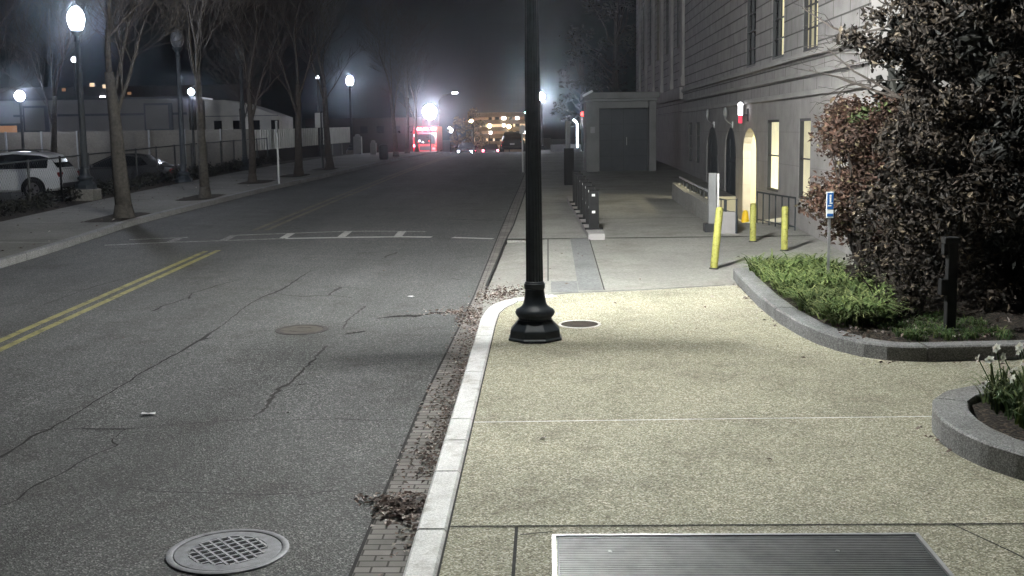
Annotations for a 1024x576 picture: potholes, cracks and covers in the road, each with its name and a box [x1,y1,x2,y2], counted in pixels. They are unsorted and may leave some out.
manhole cover [558,320,601,328]
crack [0,270,398,507]
manhole cover [275,324,328,335]
